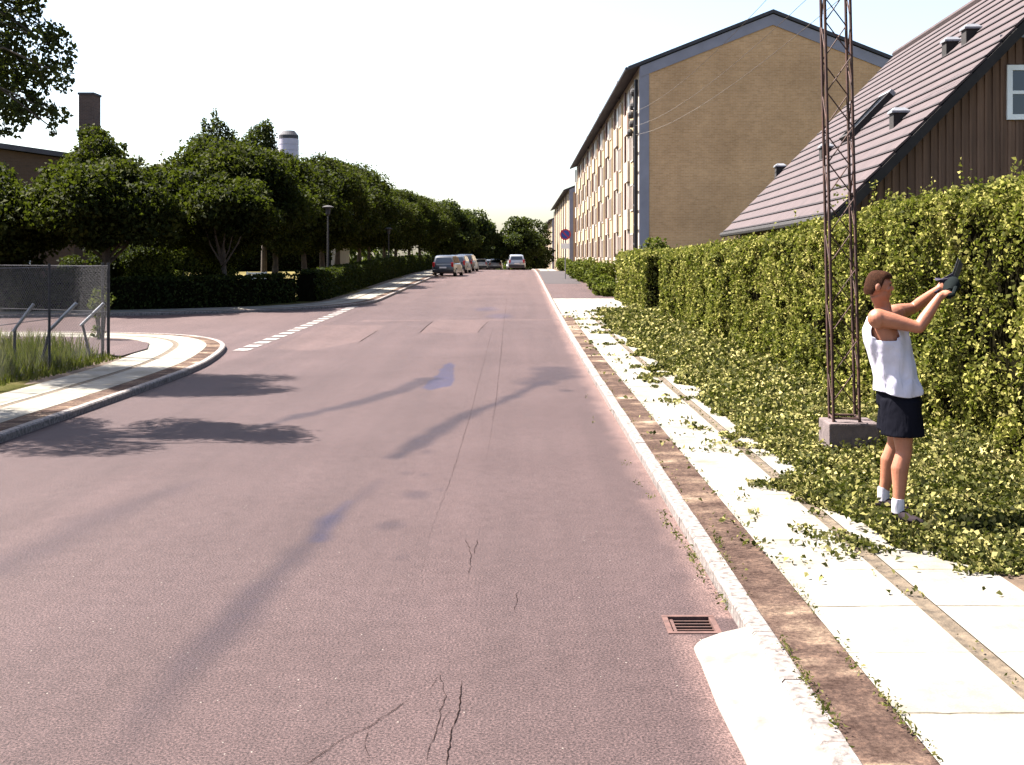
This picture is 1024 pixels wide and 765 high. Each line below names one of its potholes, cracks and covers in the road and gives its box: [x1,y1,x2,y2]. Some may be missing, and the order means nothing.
crack [305,701,406,764]
crack [422,316,526,553]
crack [426,672,462,764]
drain grate [661,615,722,634]
